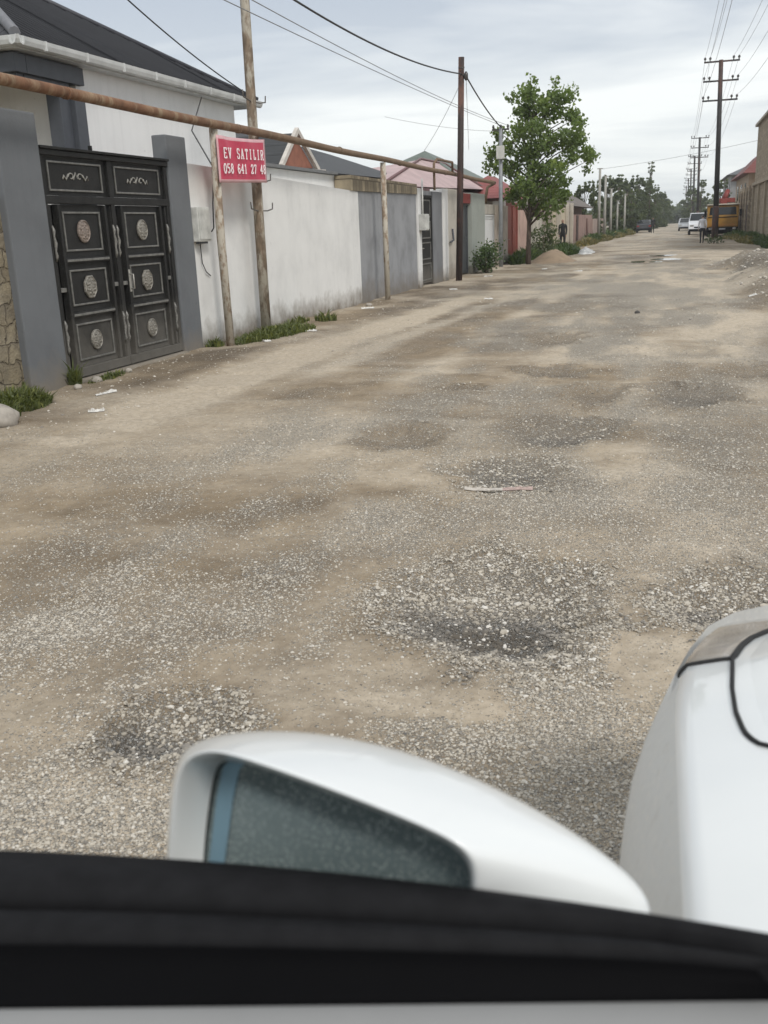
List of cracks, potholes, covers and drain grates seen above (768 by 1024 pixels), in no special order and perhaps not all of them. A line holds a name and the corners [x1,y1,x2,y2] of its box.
pothole [340,532,659,695]
pothole [503,363,610,378]
pothole [625,554,768,642]
pothole [473,406,641,453]
pothole [345,420,456,451]
pothole [60,679,277,786]
pothole [421,451,577,500]
pothole [632,381,748,415]
